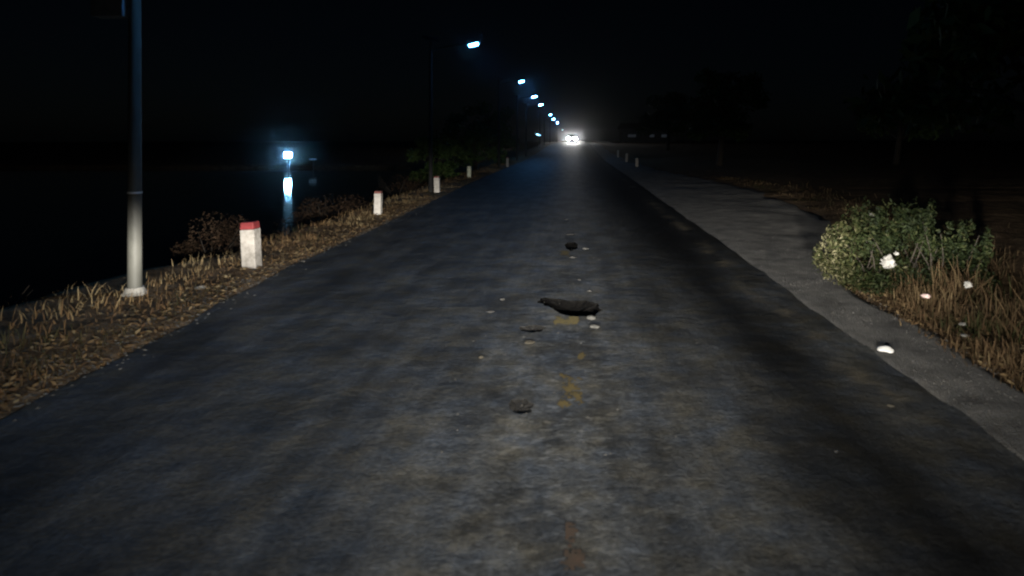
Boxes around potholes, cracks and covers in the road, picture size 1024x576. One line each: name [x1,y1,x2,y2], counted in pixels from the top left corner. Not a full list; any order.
pothole [537,296,602,316]
pothole [519,325,546,333]
pothole [509,399,534,415]
